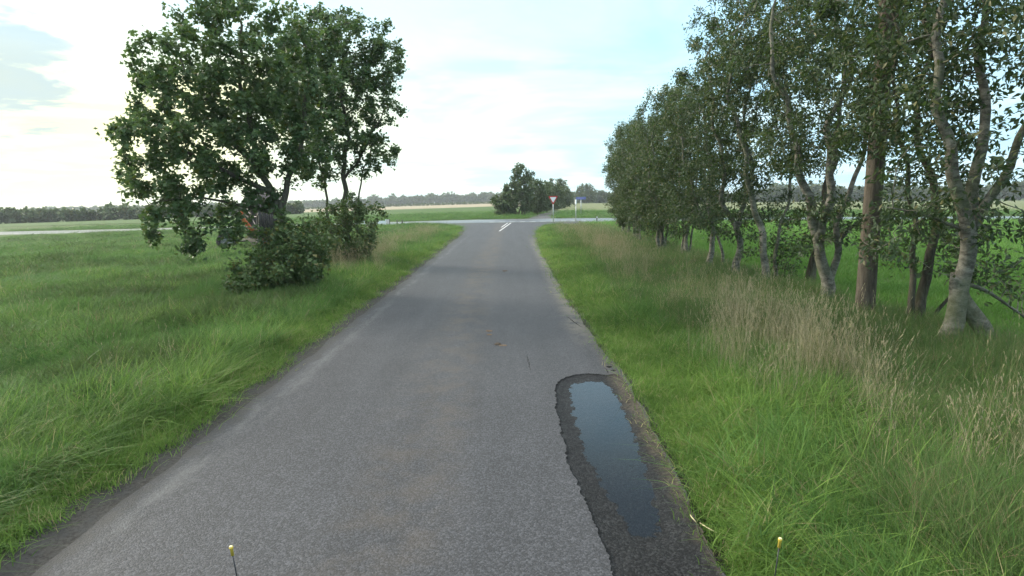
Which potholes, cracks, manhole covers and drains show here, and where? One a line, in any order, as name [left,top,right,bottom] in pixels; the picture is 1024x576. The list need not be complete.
pothole [554,373,723,576]
